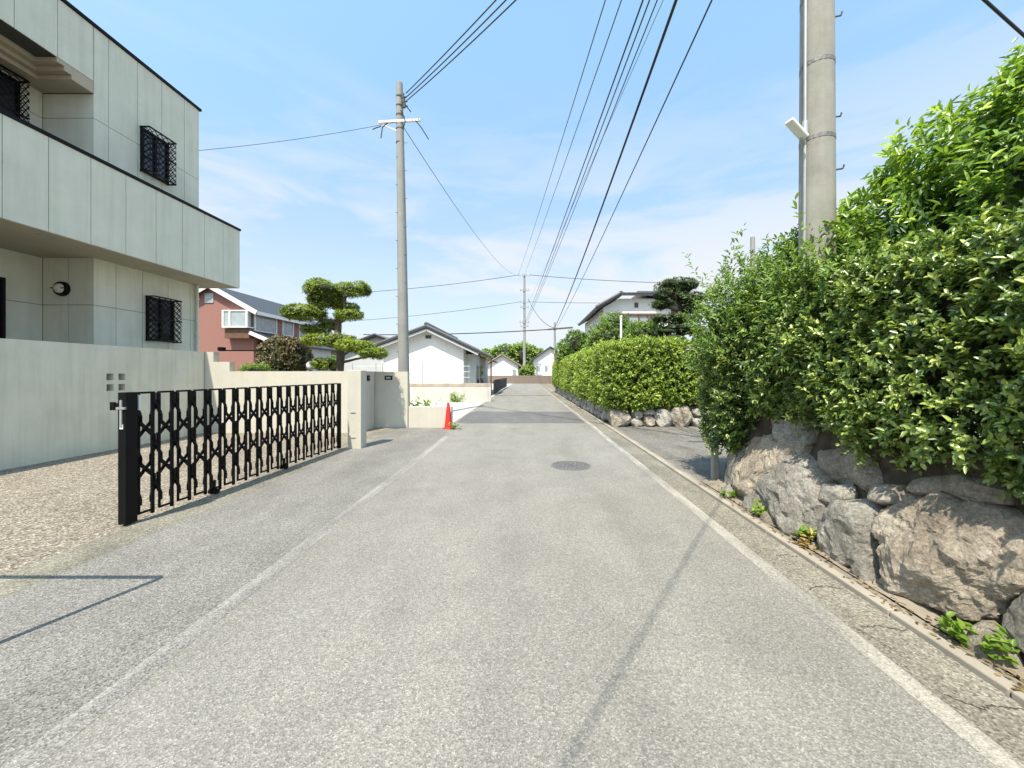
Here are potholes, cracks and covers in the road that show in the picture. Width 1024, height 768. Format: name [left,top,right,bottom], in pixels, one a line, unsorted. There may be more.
crack [944,694,1023,710]
manhole cover [551,461,591,471]
